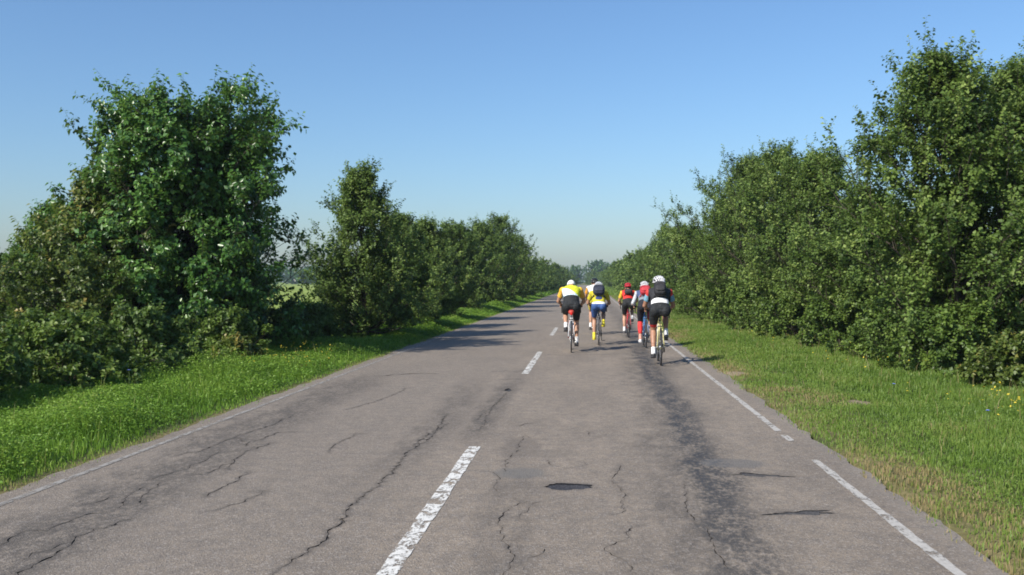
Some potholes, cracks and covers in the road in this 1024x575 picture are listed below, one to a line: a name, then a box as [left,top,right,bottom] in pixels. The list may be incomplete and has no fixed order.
crack [604,466,633,572]
crack [493,423,545,574]
crack [662,483,728,569]
crack [1,418,286,575]
